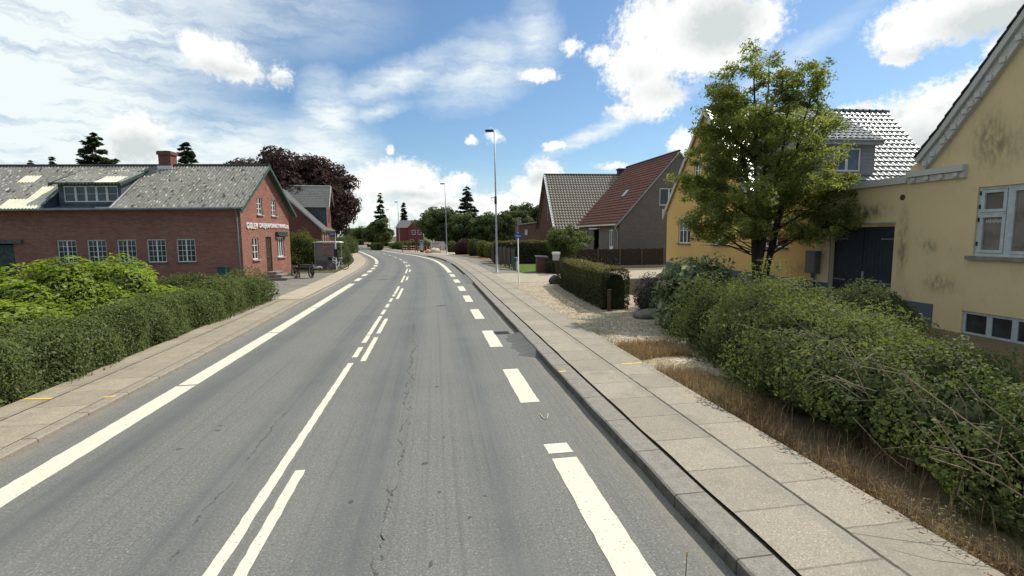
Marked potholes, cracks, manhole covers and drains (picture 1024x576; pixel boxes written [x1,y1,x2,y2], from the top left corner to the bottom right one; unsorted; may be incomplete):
crack [370,317,418,576]
